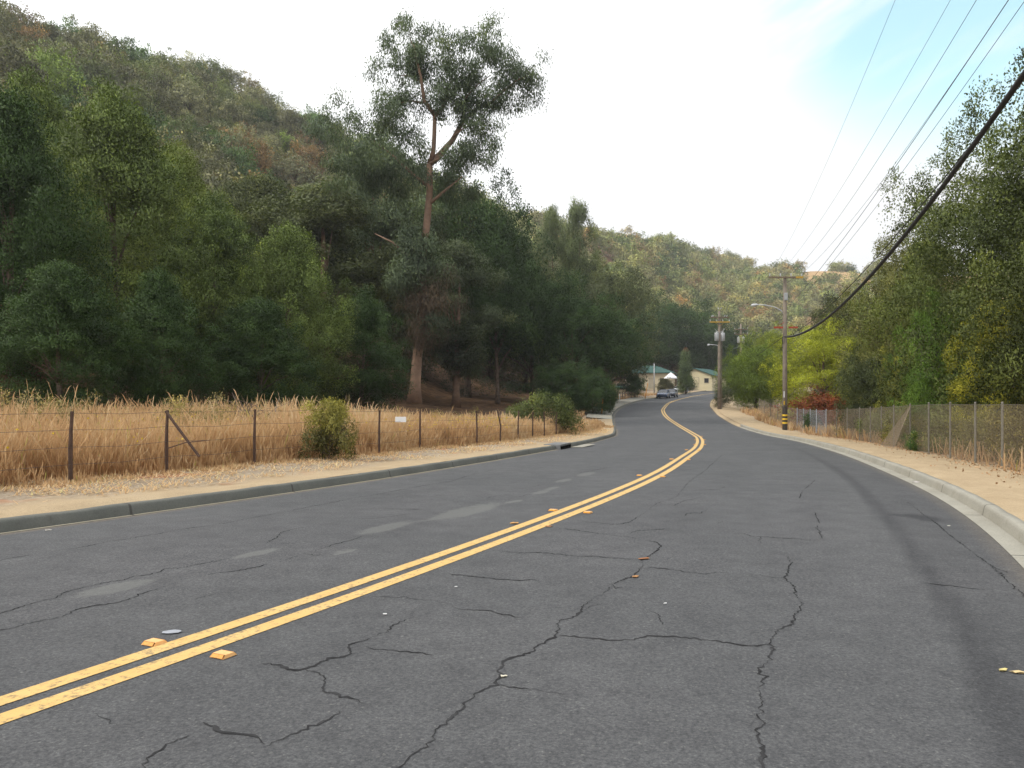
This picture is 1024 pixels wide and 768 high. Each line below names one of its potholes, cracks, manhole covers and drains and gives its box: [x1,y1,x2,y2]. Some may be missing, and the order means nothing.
crack [0,560,265,630]
drain grate [544,442,594,450]
crack [142,617,432,768]
crack [374,529,803,768]
